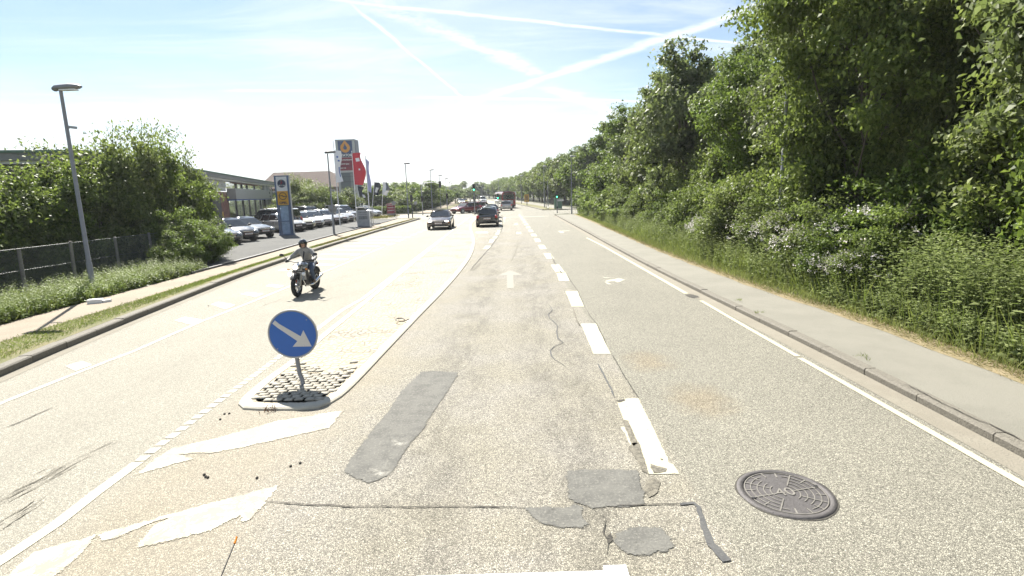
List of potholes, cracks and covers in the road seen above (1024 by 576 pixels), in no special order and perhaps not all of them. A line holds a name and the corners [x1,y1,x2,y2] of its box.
crack [542,305,566,367]
manhole cover [736,470,838,520]
crack [602,503,679,551]
